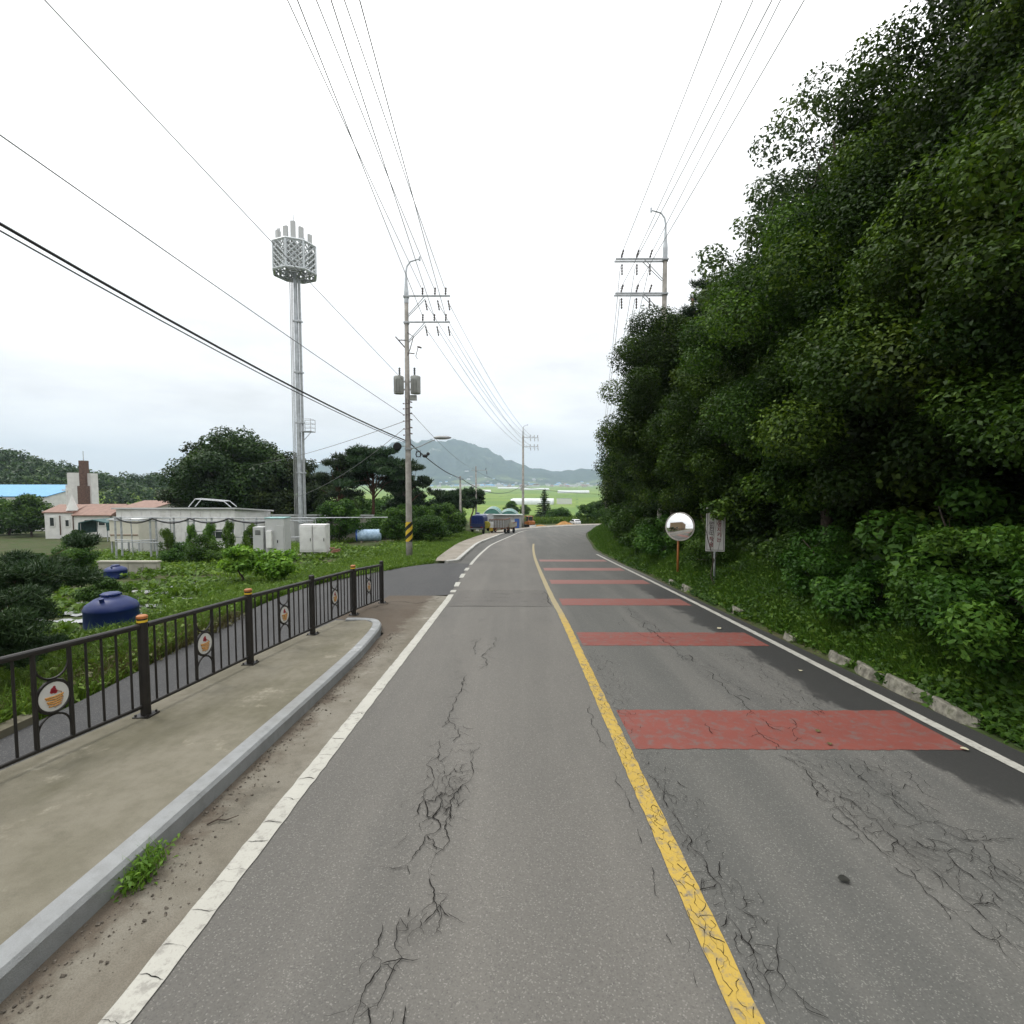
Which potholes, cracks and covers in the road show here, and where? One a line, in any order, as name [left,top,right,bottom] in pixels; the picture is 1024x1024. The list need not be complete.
crack [325,639,494,1024]
crack [581,653,829,1024]
crack [614,608,1024,968]
